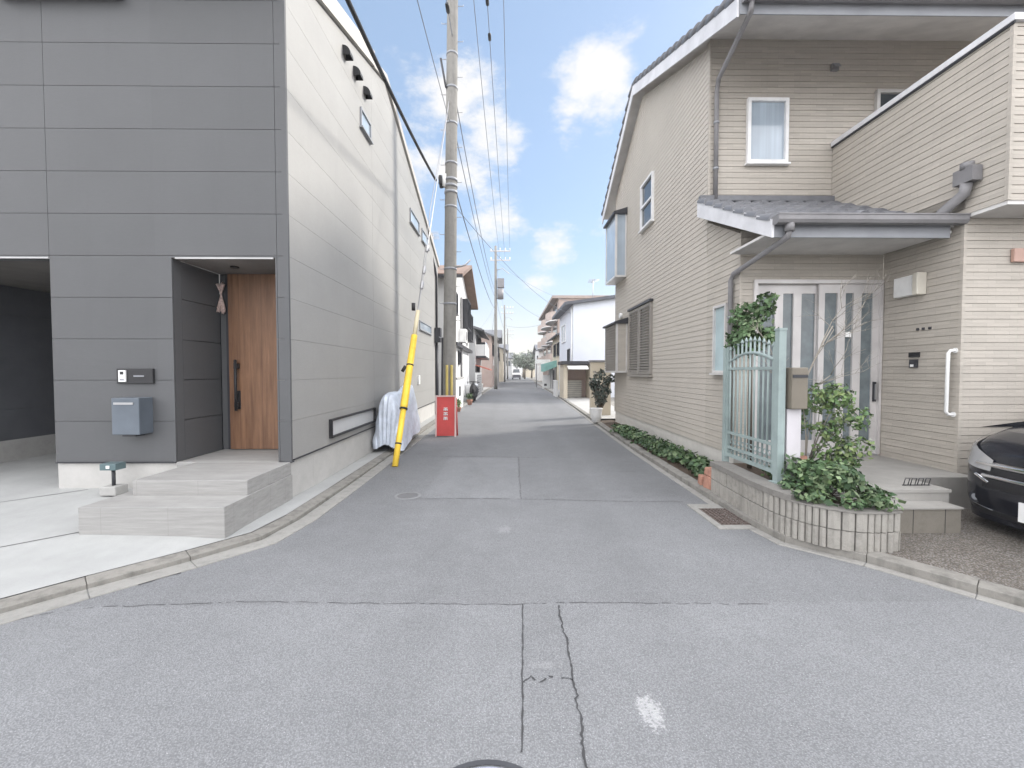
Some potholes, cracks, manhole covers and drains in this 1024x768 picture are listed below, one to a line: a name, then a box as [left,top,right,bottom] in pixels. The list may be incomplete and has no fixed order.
drain grate [687,504,755,530]
utility cover [394,492,421,500]
crack [21,601,764,768]
